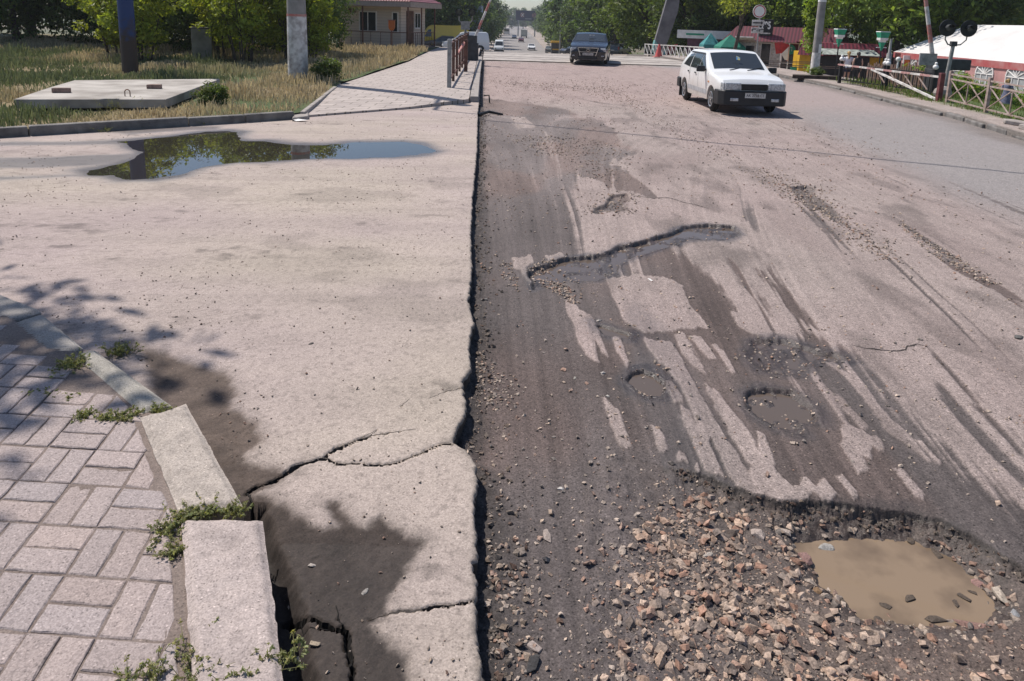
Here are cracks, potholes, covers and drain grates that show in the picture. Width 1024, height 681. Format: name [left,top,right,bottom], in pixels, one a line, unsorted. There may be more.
pothole [737,386,824,436]
crack [852,344,929,352]
pothole [590,193,632,215]
pothole [622,368,672,399]
pothole [677,462,1024,681]
pothole [524,223,745,291]
crack [289,600,473,681]
crack [245,429,456,521]
